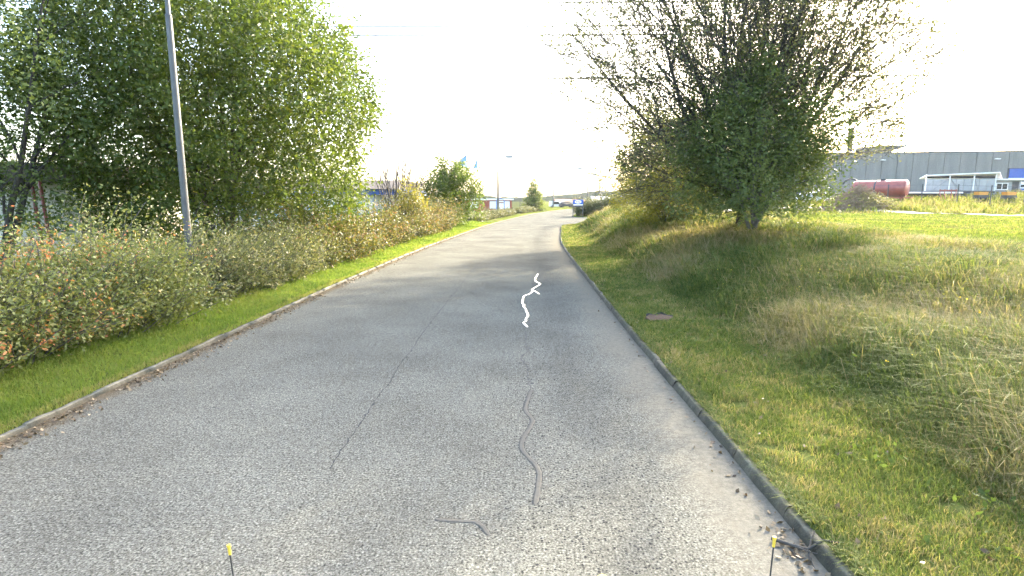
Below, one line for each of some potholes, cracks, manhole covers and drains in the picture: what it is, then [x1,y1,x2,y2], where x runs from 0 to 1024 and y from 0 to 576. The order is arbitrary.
crack [329,231,512,469]
